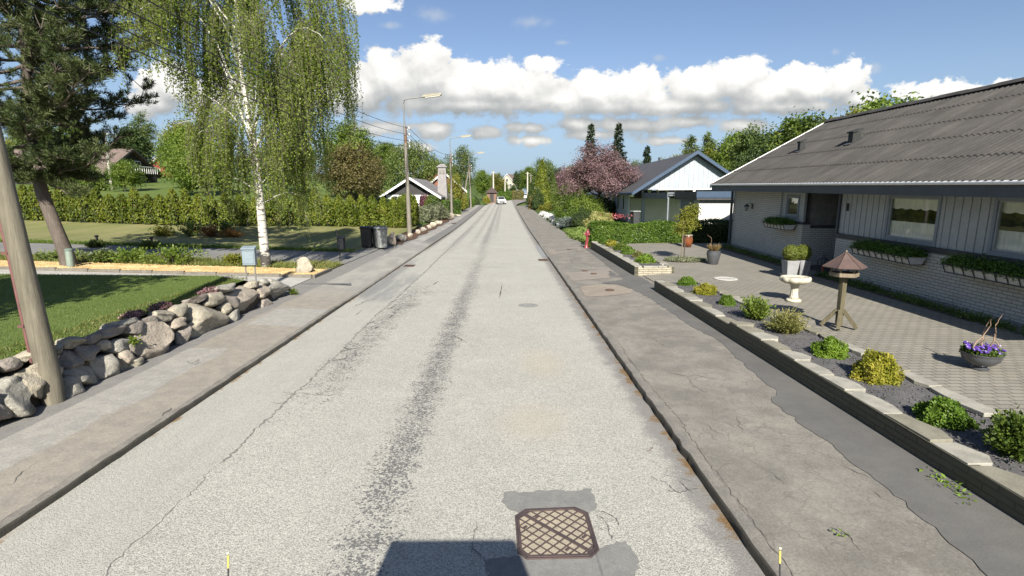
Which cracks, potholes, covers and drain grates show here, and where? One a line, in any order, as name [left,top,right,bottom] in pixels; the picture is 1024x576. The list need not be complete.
crack [471,522,488,574]
manhole cover [515,507,599,560]
crack [593,510,620,538]
